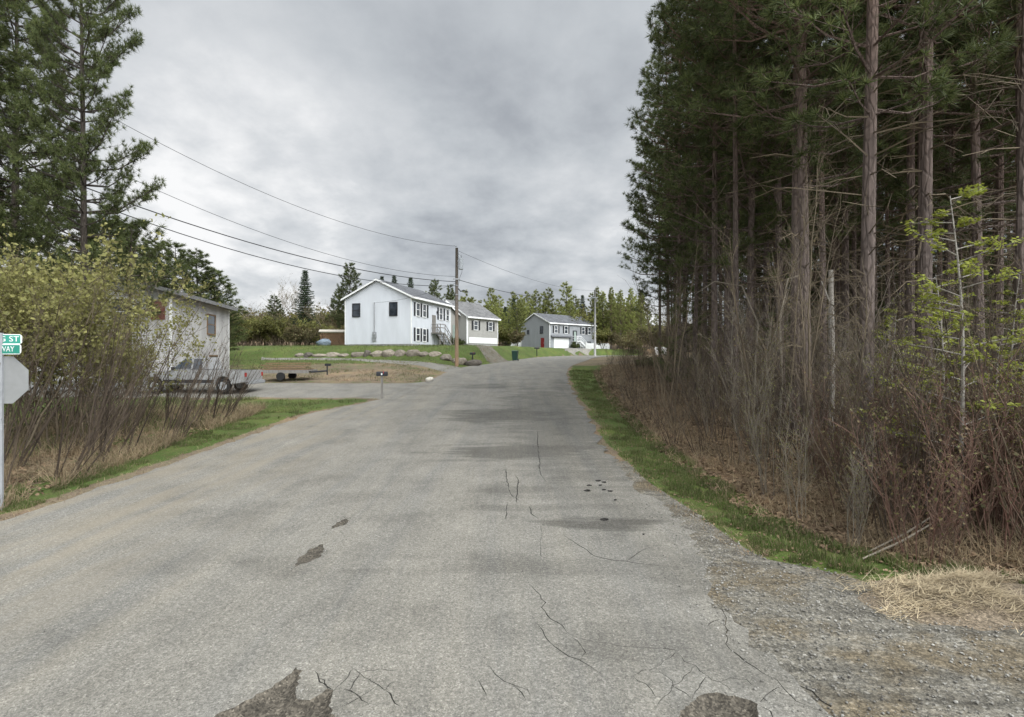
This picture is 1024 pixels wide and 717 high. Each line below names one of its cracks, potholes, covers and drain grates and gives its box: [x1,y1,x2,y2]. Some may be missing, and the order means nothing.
crack [564,535,678,568]
pothole [679,692,758,717]
crack [529,584,831,717]
pothole [295,544,324,567]
crack [477,667,531,698]
crack [505,471,519,517]
crack [316,668,398,707]
pothole [214,667,335,717]
